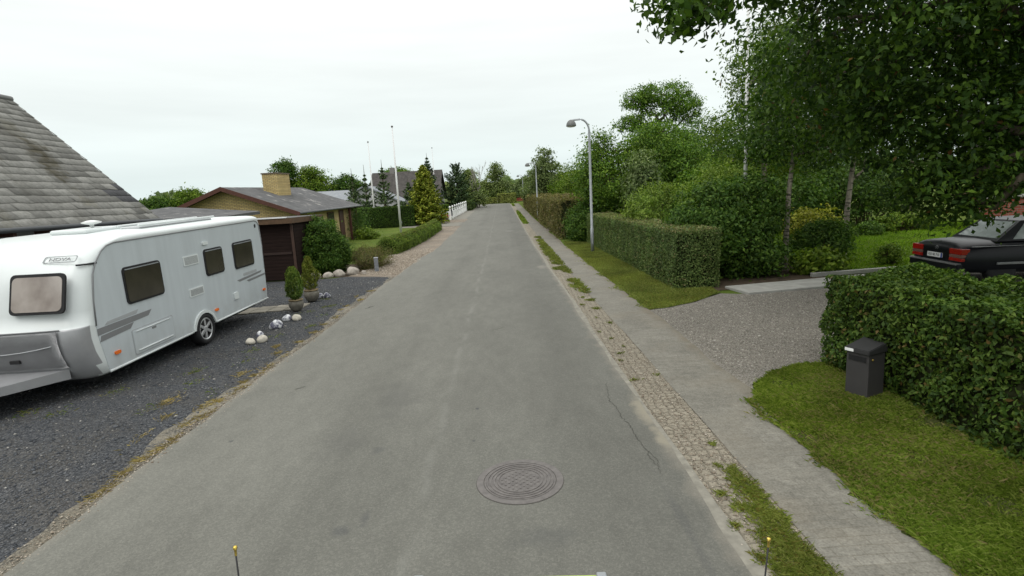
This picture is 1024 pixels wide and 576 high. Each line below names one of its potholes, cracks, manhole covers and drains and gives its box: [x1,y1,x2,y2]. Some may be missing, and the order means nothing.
crack [606,383,660,470]
manhole cover [476,459,564,505]
